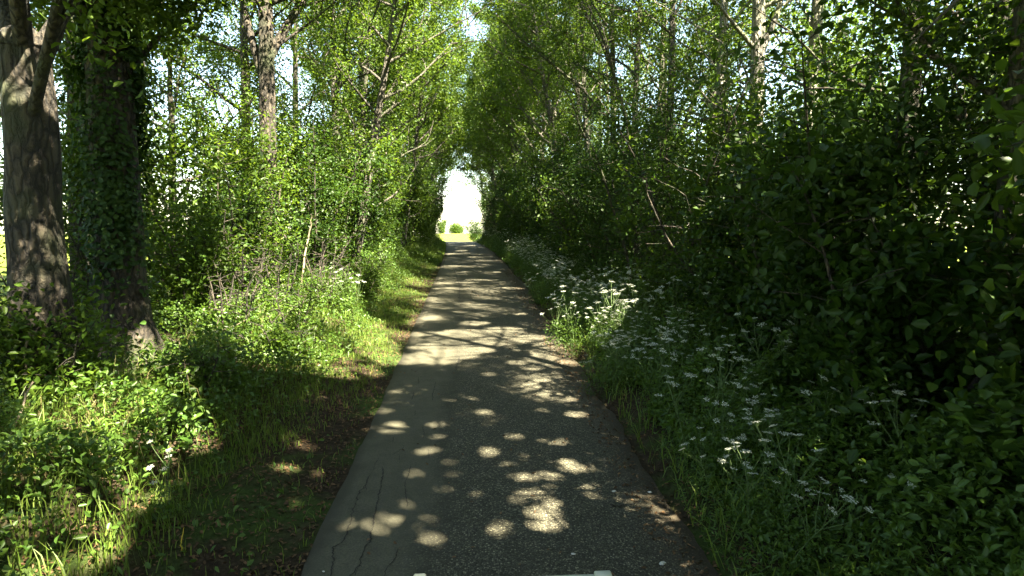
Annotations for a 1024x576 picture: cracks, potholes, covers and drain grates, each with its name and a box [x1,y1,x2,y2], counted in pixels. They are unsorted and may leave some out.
crack [330,425,429,576]
